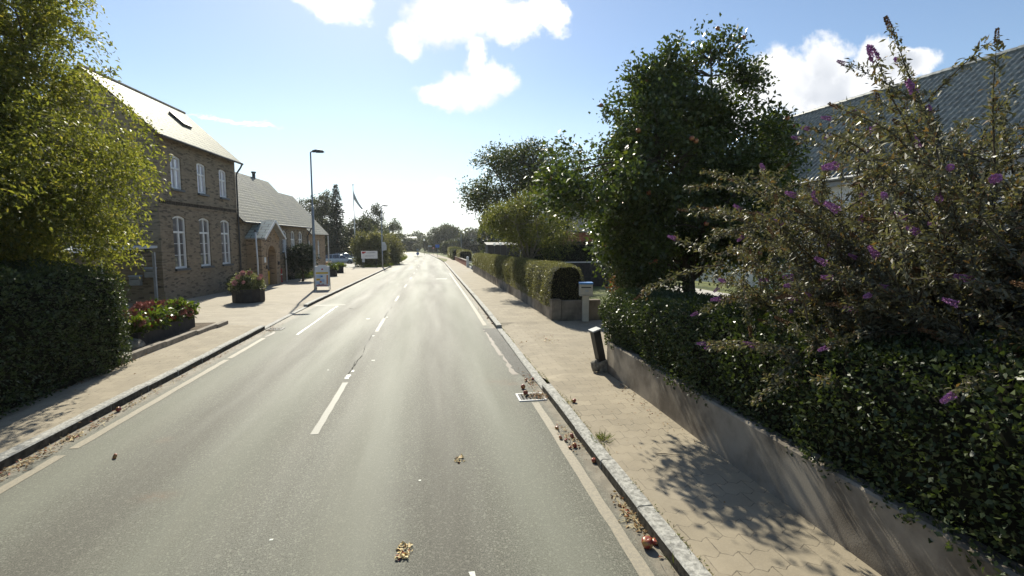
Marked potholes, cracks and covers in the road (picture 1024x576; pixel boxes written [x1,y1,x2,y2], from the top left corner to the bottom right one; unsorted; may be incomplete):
drain grate [515,392,547,402]
